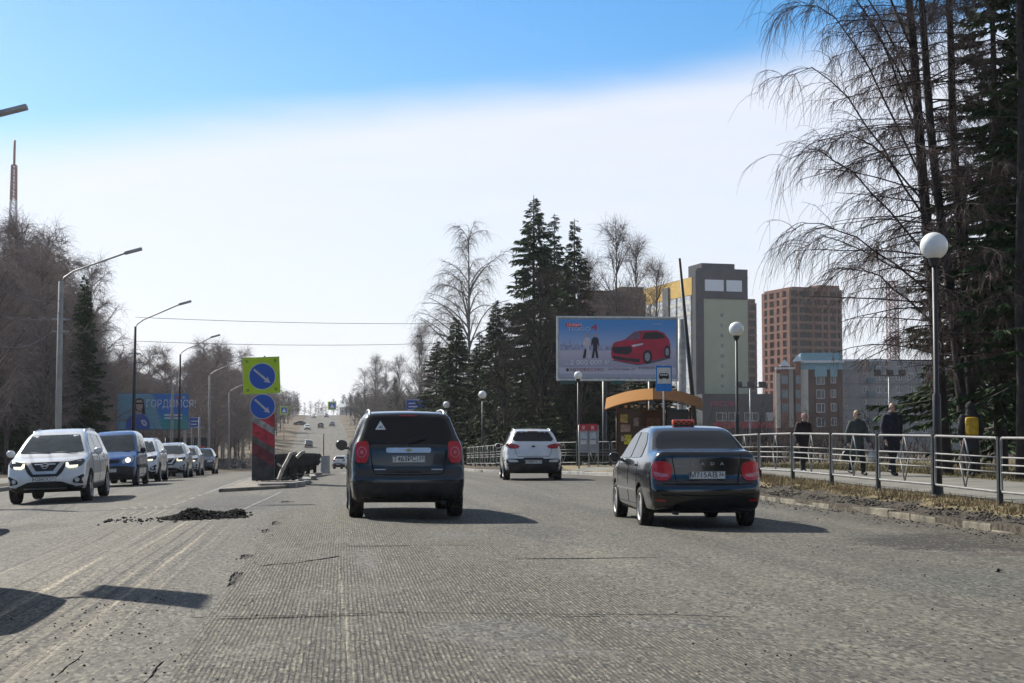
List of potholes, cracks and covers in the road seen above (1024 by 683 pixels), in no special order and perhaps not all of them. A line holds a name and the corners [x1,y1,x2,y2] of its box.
pothole [227,571,244,587]
crack [144,660,165,683]
crack [262,556,339,566]
